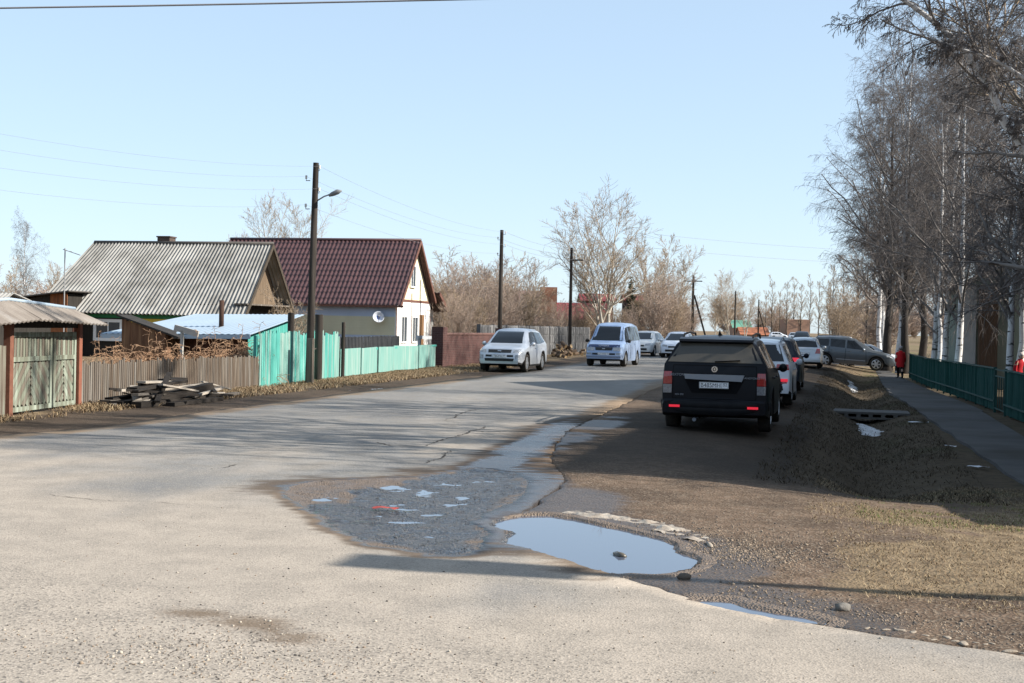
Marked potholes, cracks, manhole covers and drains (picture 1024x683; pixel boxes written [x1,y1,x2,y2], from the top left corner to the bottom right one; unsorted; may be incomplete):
pothole [282,467,528,555]
crack [377,408,500,463]
pothole [489,511,718,579]
